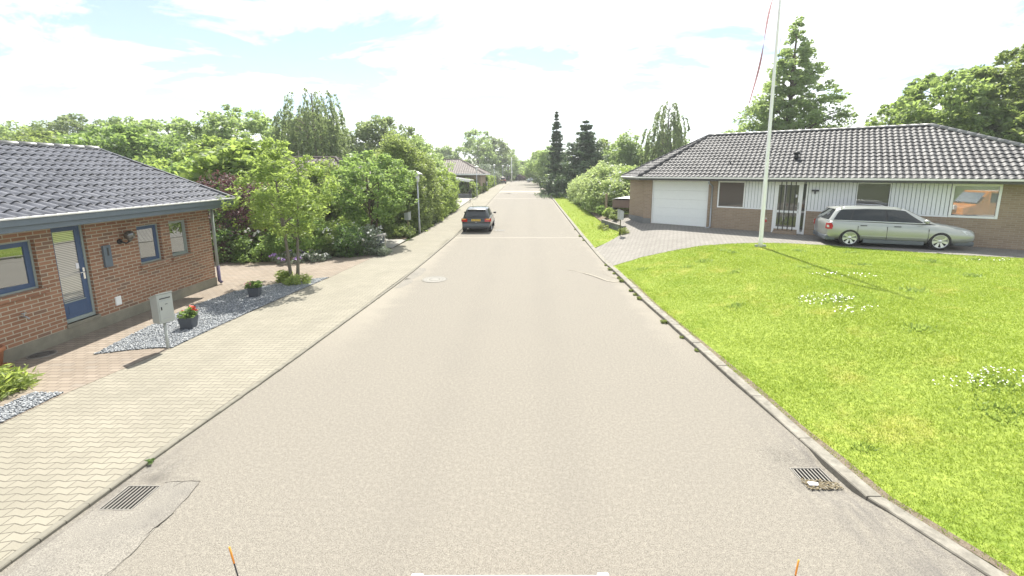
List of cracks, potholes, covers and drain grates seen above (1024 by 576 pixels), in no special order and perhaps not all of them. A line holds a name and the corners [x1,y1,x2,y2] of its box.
drain grate [789,468,841,490]
drain grate [98,485,161,510]
